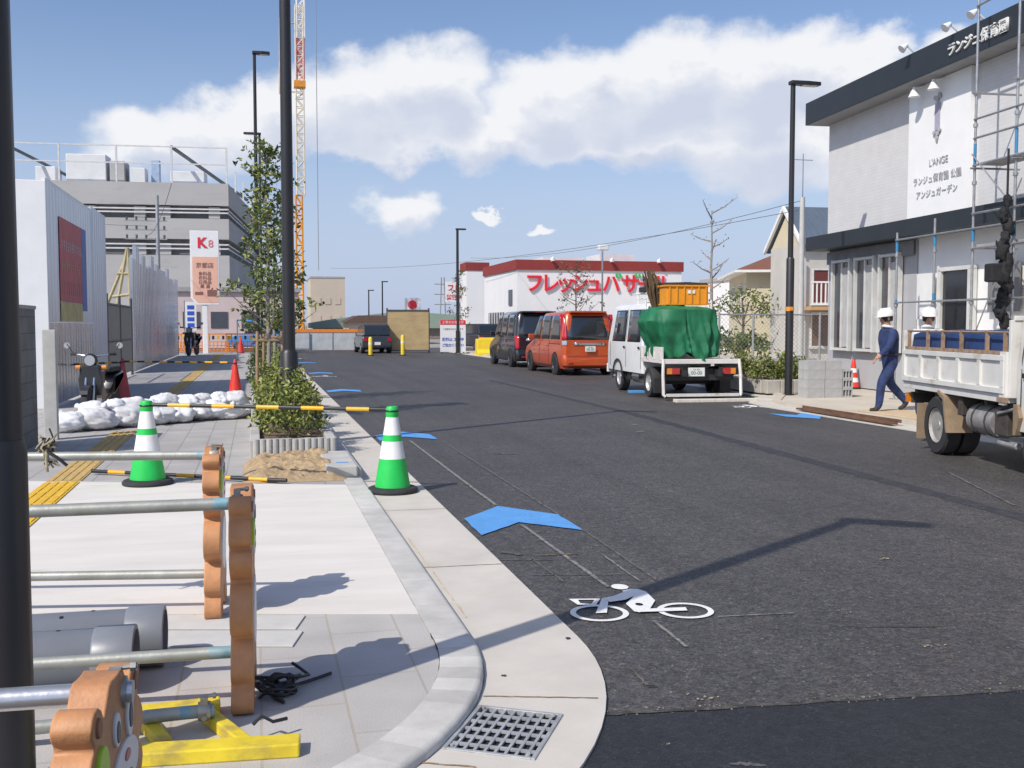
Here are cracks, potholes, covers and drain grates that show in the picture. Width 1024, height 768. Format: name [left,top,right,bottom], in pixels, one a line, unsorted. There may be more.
drain grate [442,705,563,761]
